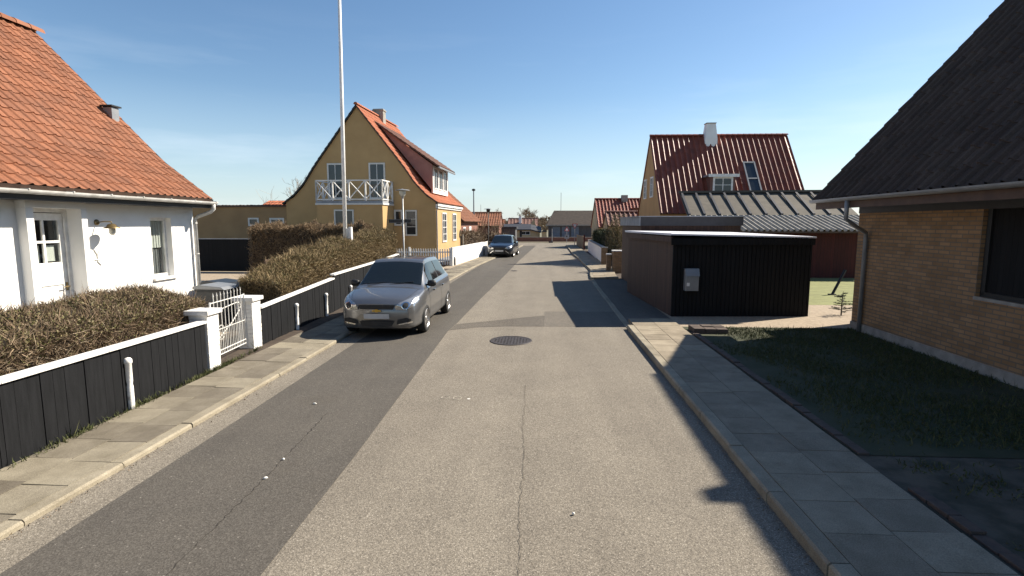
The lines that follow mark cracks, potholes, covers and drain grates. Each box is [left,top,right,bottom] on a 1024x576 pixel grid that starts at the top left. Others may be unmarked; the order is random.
crack [518,388,526,575]
manhole cover [490,336,532,345]
crack [166,421,320,576]
